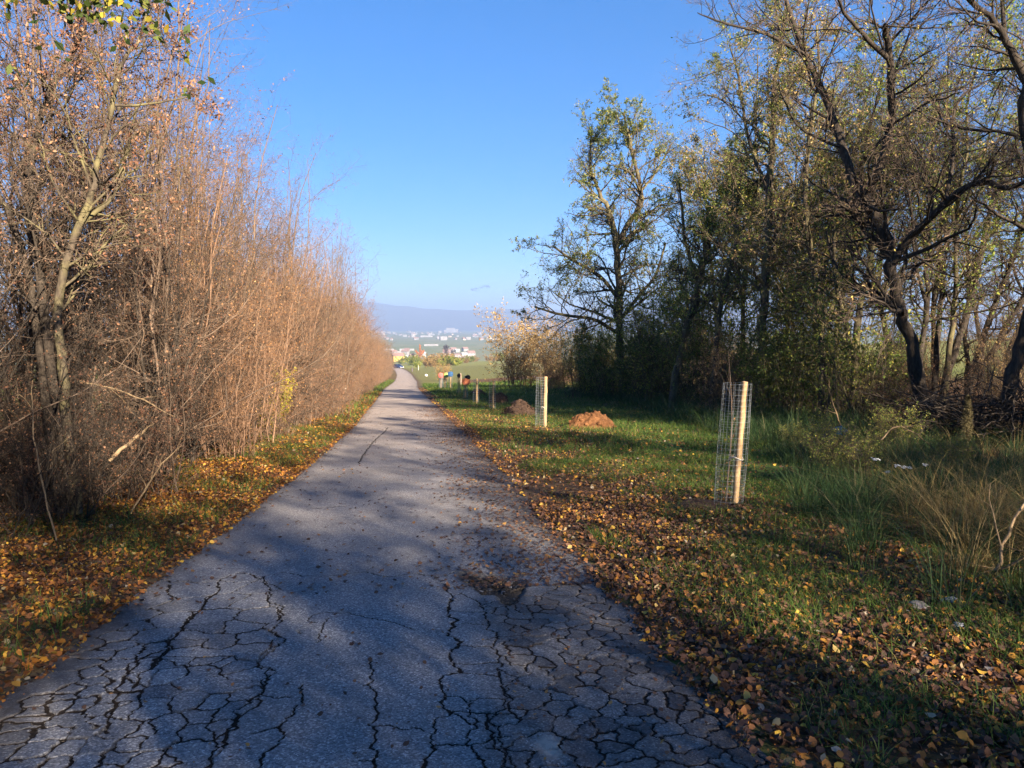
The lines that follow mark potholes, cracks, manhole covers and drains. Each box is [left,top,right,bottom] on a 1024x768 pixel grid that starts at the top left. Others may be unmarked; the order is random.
pothole [462,575,526,606]
crack [358,583,768,768]
crack [0,572,454,768]
